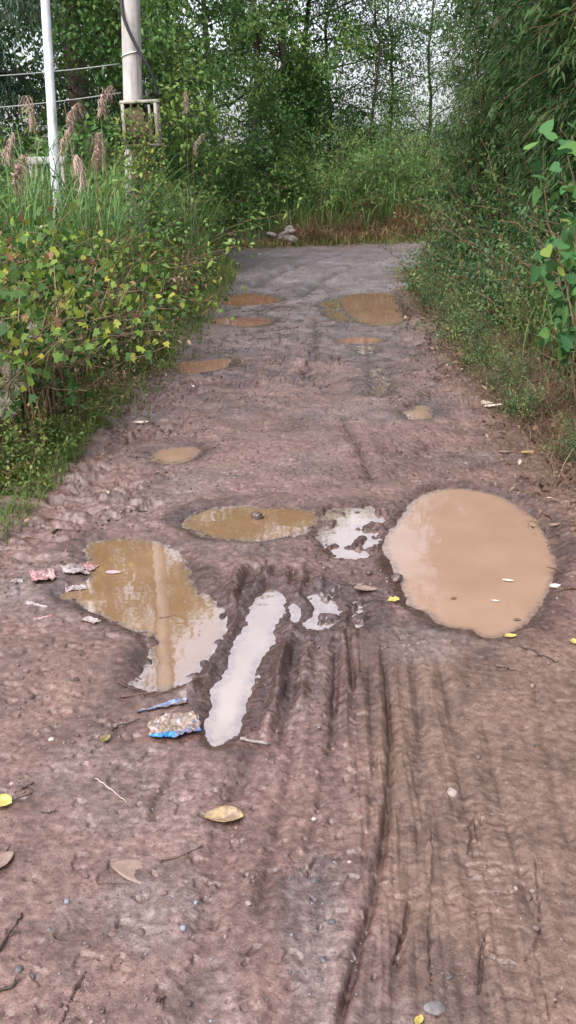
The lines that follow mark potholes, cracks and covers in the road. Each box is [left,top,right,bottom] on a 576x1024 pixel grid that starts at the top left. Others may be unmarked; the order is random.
pothole [391,399,445,421]
pothole [213,290,291,306]
pothole [166,498,323,543]
pothole [378,481,575,640]
pothole [294,581,349,633]
pothole [327,333,395,344]
pothole [165,354,244,375]
pothole [191,314,284,328]
pothole [302,496,399,560]
pothole [49,530,238,696]
pothole [335,289,418,326]
pothole [306,296,359,323]
